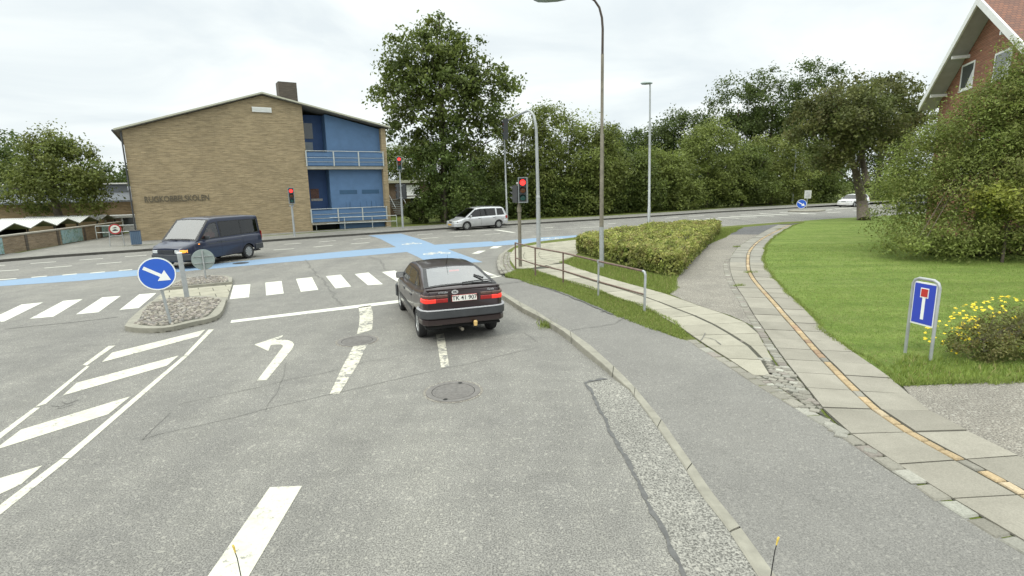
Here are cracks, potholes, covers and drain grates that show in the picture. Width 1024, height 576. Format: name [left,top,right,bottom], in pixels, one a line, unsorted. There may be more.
crack [306,260,344,306]
manhole cover [423,381,483,403]
manhole cover [335,335,379,347]
